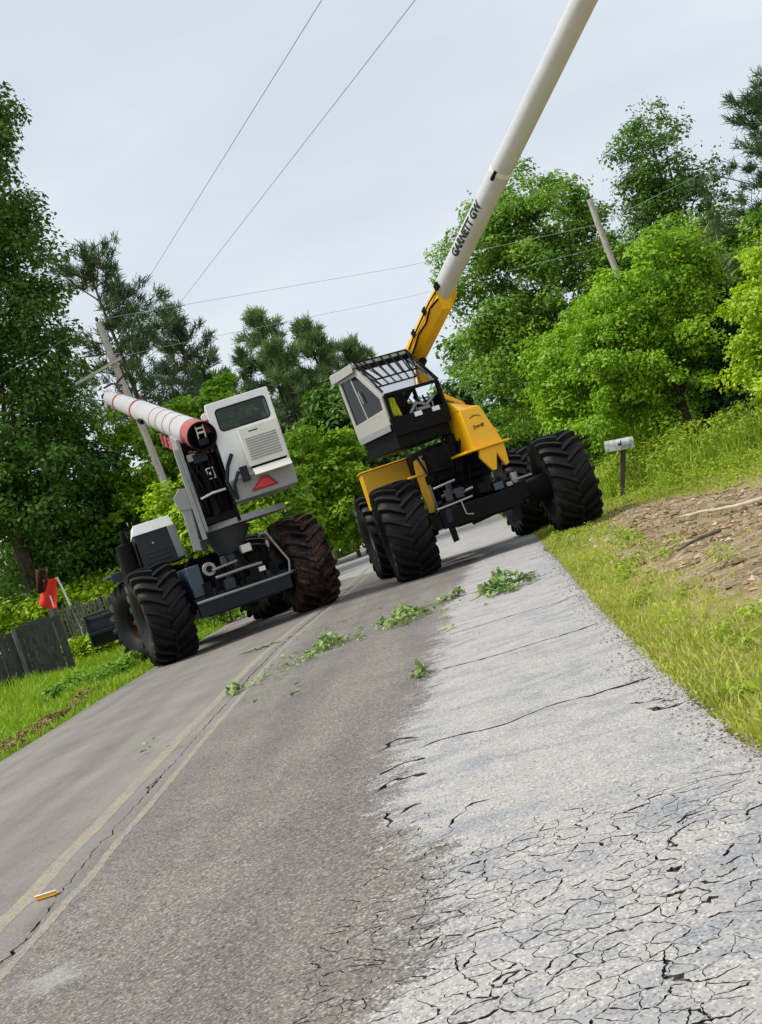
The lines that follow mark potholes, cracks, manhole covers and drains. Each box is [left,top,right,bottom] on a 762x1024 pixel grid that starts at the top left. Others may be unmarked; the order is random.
crack [376,676,684,828]
crack [567,770,755,818]
